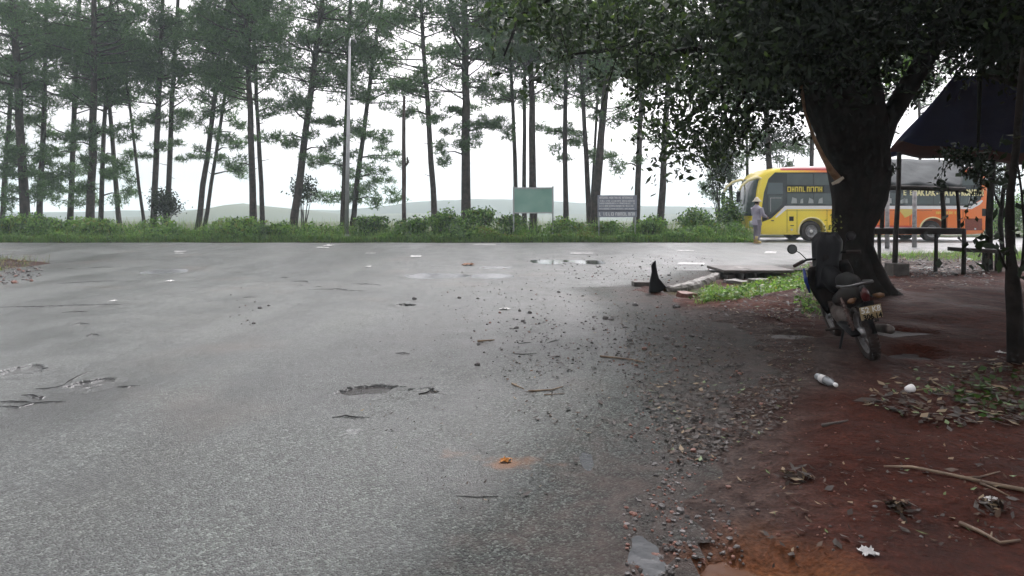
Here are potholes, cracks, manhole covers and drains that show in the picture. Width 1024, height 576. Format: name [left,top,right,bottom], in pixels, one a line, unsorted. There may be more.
pothole [0,361,64,380]
pothole [44,374,132,394]
pothole [319,381,429,401]
